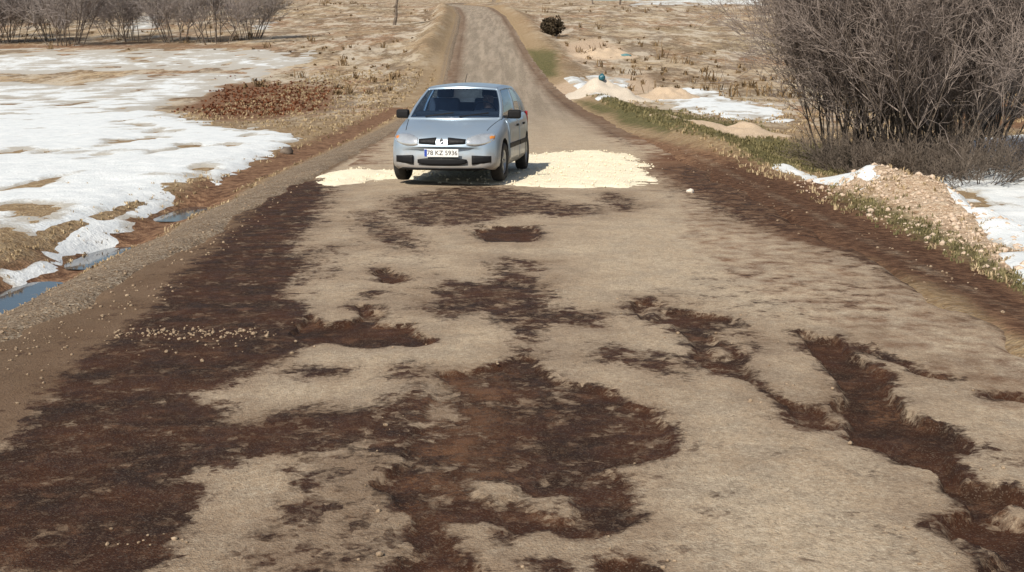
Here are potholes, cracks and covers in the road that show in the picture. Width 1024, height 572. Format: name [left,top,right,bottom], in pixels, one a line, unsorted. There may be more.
pothole [473,225,542,242]
pothole [288,304,438,348]
pothole [368,356,676,572]
